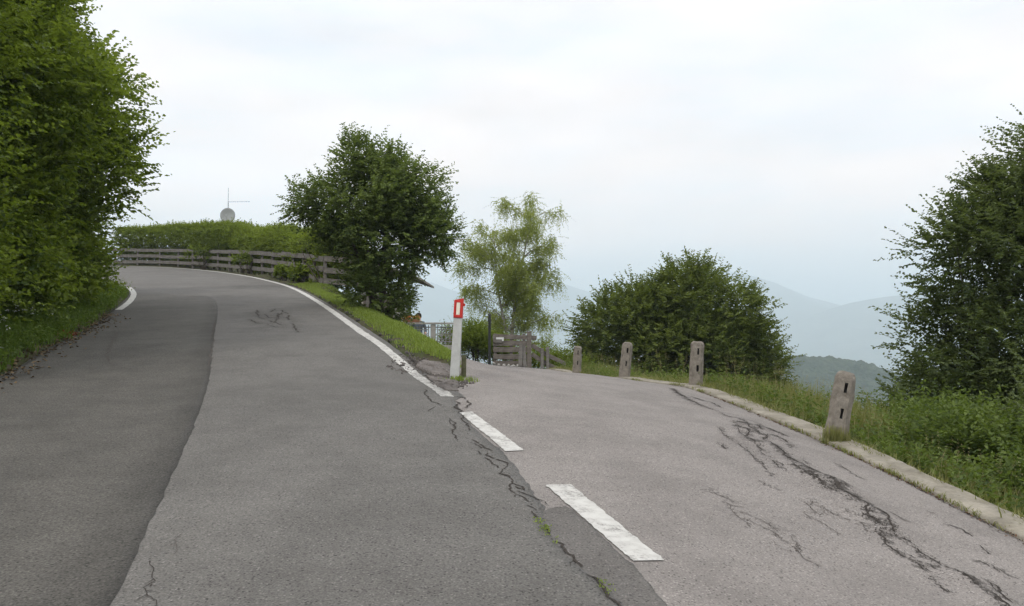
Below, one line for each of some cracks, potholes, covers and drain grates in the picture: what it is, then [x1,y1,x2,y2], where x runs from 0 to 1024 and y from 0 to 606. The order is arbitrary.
crack [137,534,181,606]
crack [409,356,622,606]
crack [247,309,302,333]
crack [668,387,1016,606]
